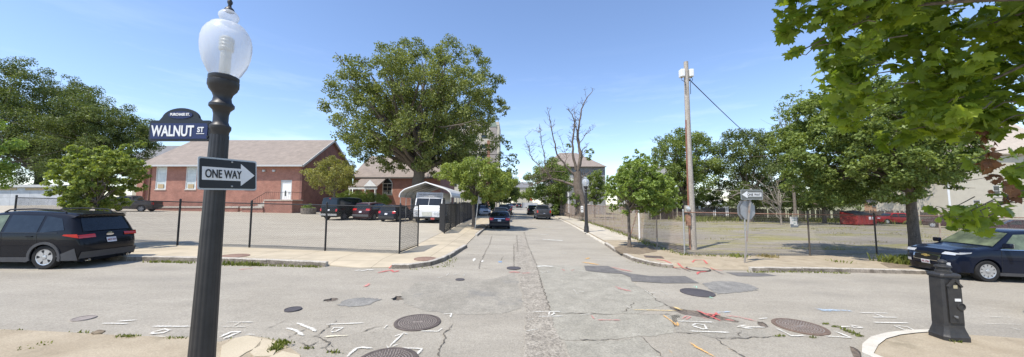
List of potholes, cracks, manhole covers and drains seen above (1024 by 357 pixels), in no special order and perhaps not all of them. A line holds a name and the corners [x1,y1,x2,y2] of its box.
manhole cover [361,347,419,357]
manhole cover [771,318,831,336]
manhole cover [680,288,716,297]
manhole cover [394,314,441,331]
crack [268,321,336,353]
